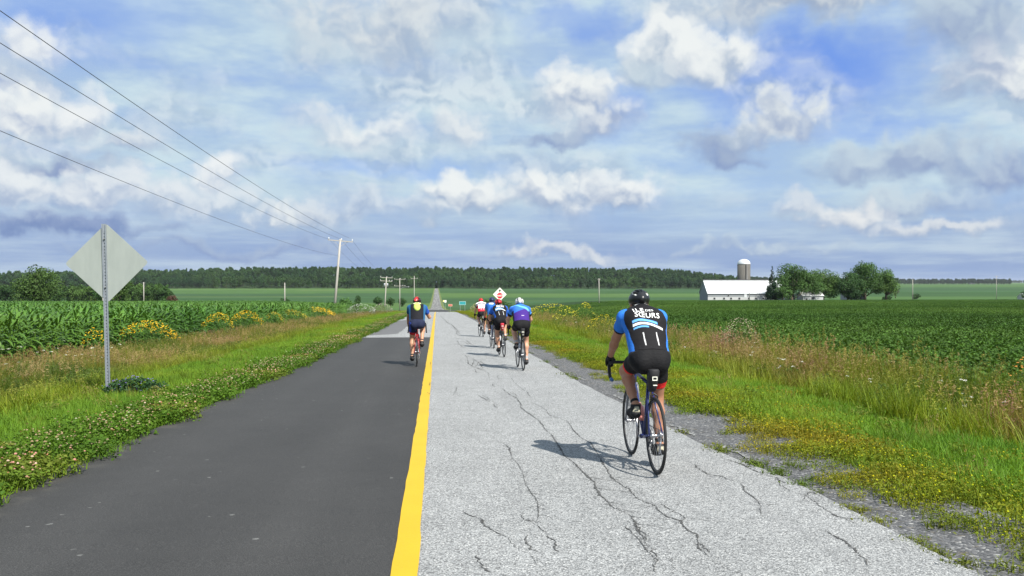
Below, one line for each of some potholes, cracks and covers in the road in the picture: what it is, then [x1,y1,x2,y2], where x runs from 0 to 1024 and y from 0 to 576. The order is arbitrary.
crack [695,460,896,568]
crack [444,319,741,574]
